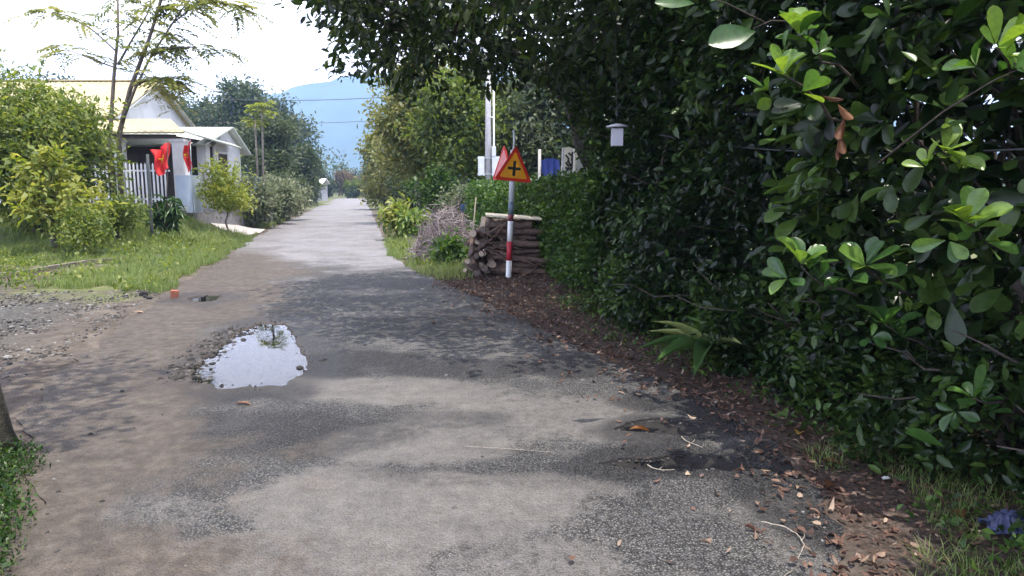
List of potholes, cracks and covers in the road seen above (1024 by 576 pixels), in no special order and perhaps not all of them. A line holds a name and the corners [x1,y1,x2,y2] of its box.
pothole [598,452,754,473]
pothole [190,320,312,390]
pothole [614,417,717,436]
